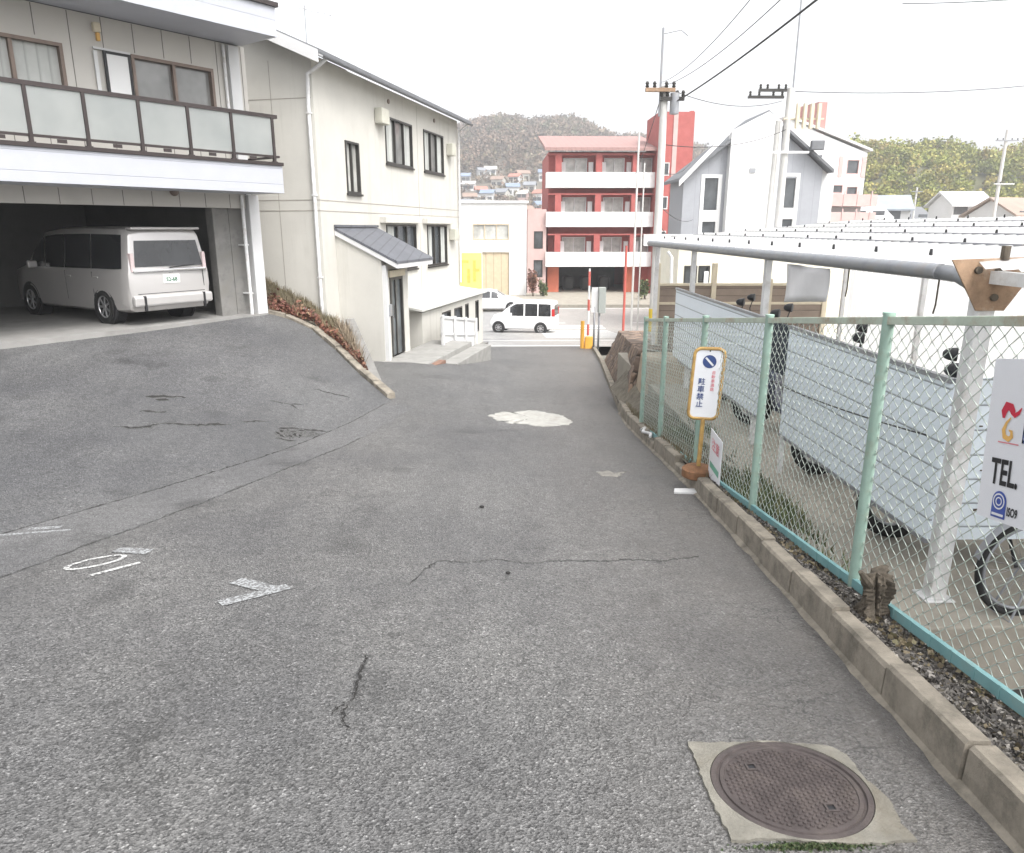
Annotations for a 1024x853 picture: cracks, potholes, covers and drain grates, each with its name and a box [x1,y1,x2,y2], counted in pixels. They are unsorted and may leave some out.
crack [115,389,350,442]
manhole cover [688,740,917,846]
crack [331,654,369,730]
crack [410,556,699,584]
